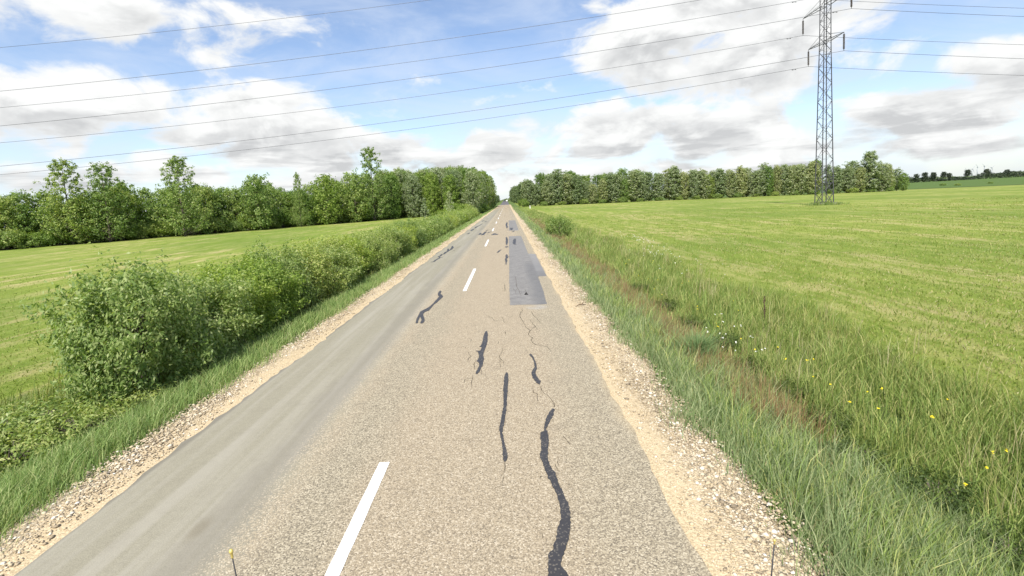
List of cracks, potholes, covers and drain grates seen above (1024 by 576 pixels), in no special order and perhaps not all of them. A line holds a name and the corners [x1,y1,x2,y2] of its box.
crack [491,275,547,368]
